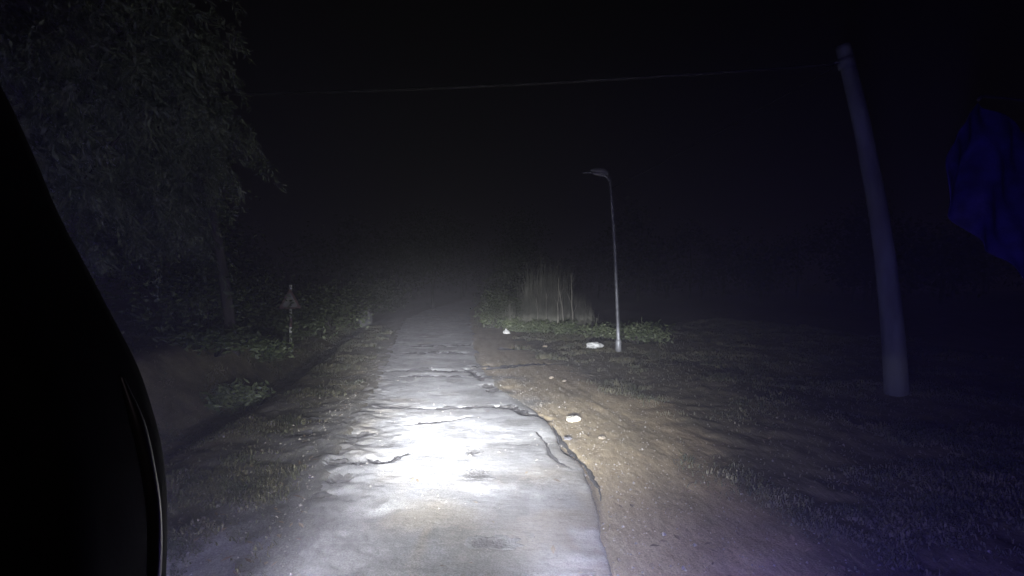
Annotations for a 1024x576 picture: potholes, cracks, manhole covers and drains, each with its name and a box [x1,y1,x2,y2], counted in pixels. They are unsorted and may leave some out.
pothole [462,469,496,480]
crack [392,344,552,381]
crack [367,454,409,465]
crack [534,426,601,501]
crack [414,417,469,425]
